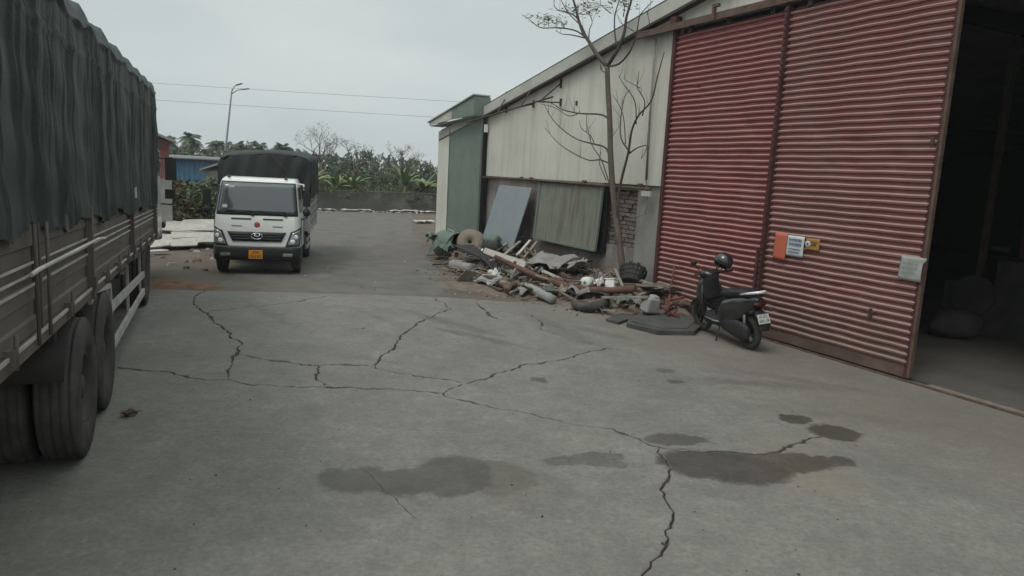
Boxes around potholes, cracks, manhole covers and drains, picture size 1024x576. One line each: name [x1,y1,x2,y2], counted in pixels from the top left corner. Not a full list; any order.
crack [118,290,820,576]
